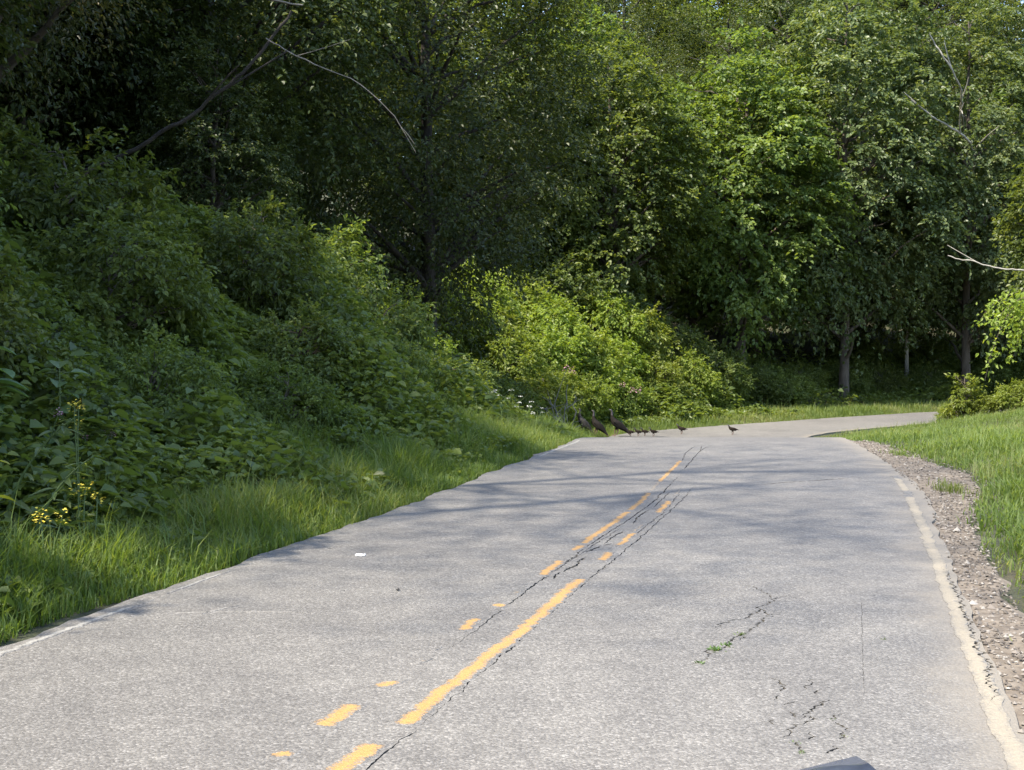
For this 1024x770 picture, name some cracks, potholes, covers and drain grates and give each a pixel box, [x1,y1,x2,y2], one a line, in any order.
crack [701,585,789,661]
crack [764,678,850,754]
crack [366,445,705,770]
